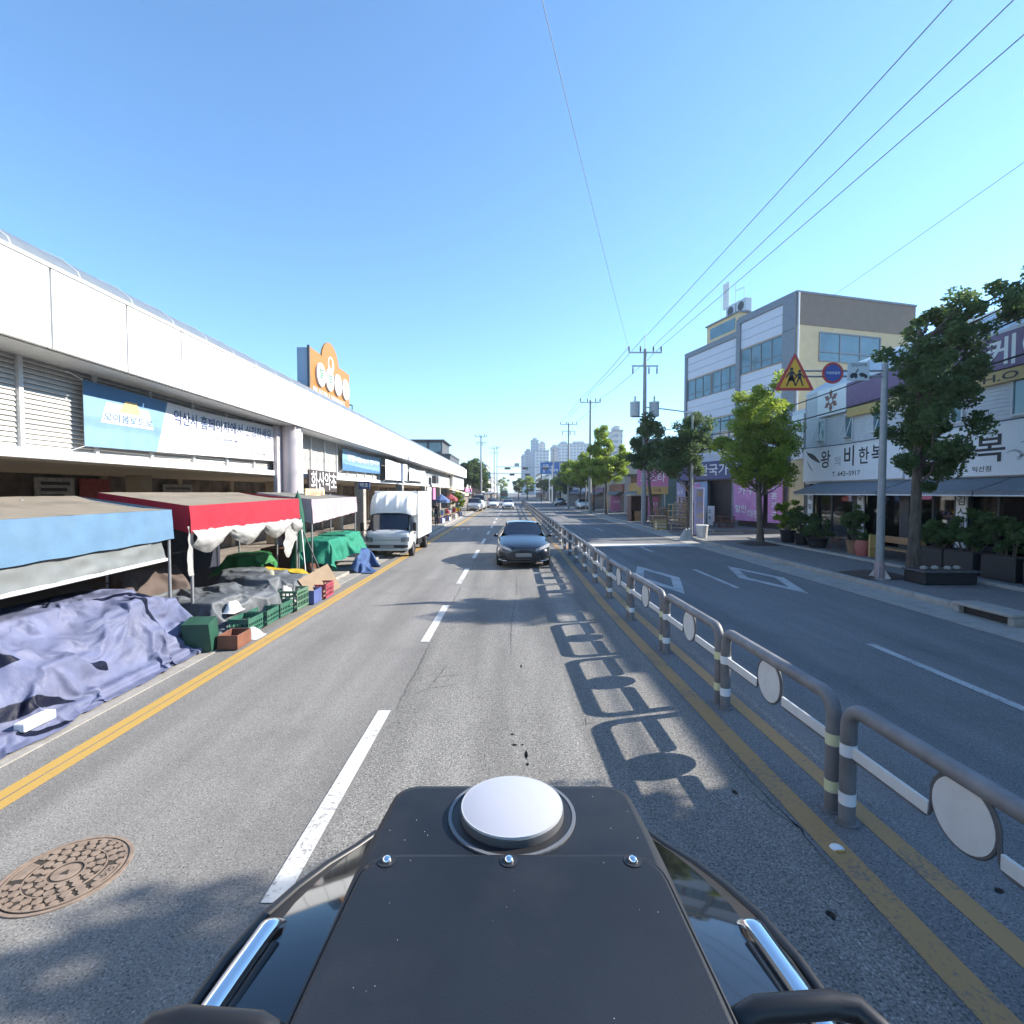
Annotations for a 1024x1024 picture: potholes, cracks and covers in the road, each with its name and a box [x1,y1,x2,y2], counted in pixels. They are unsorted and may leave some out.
manhole cover [0,835,134,919]
crack [720,747,831,868]
